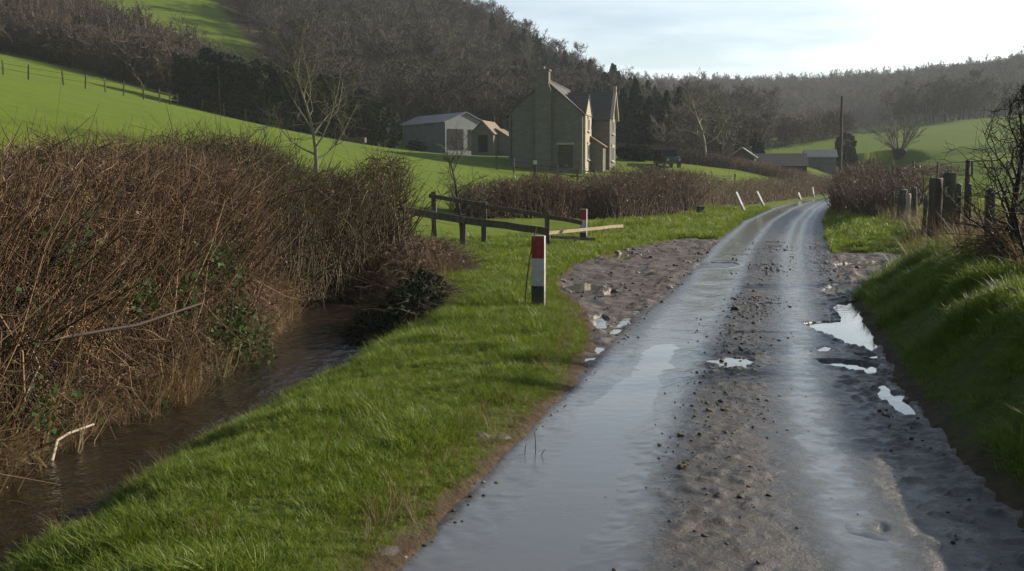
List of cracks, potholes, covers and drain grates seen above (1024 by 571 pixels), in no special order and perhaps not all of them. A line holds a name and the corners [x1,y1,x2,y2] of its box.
pothole [700,355,768,372]
pothole [793,299,884,352]
pothole [859,377,925,418]
